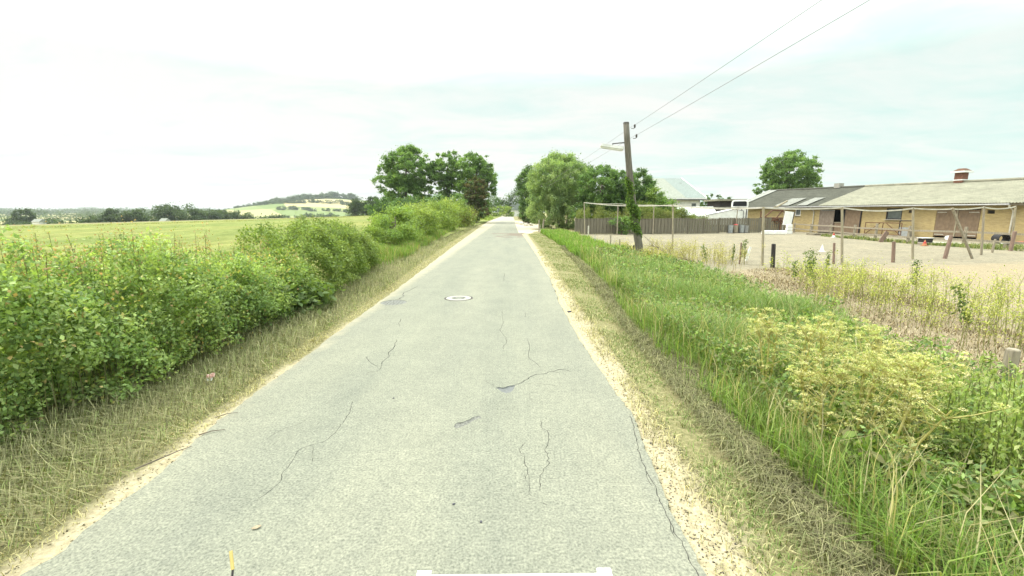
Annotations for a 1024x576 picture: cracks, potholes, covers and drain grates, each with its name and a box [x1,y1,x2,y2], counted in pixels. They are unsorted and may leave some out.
pothole [454,416,481,428]
crack [630,417,699,576]
crack [258,401,353,499]
crack [516,341,568,404]
crack [519,423,553,505]
